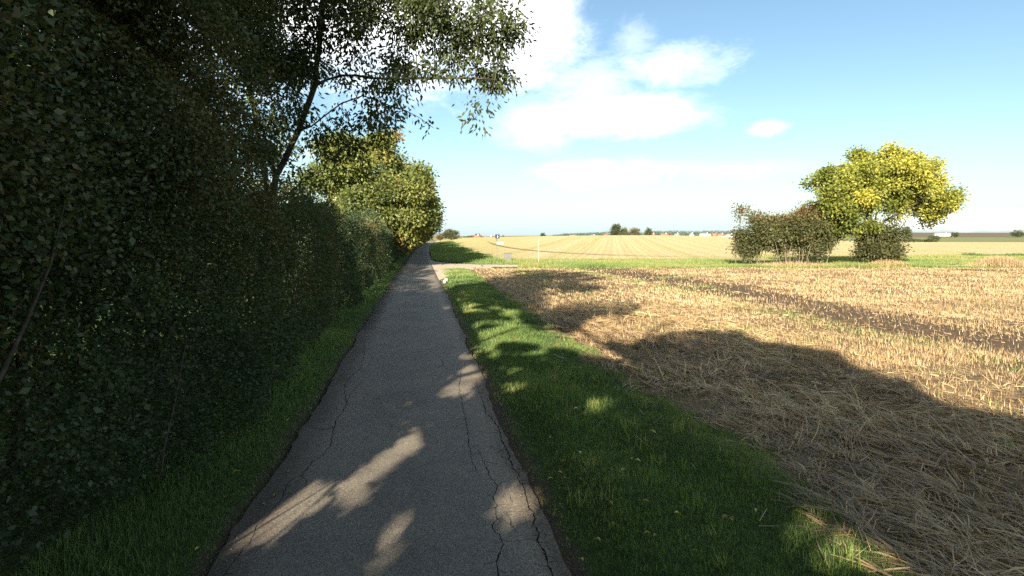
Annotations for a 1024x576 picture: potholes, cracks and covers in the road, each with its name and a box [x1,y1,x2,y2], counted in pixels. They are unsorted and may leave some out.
crack [223,342,365,576]
crack [456,371,558,576]
